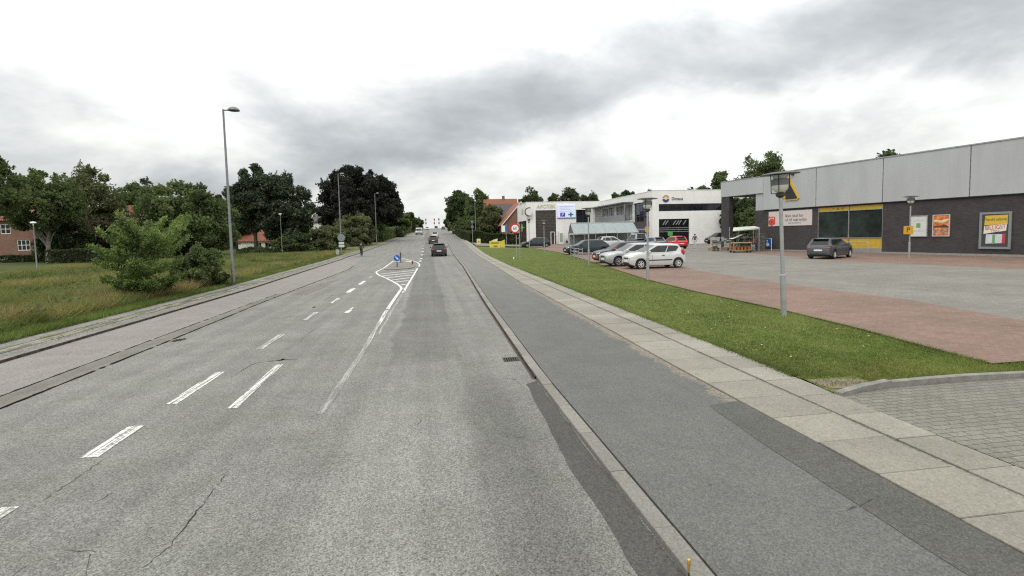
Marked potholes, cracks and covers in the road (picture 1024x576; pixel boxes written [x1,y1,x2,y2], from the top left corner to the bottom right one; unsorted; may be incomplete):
crack [142,475,226,568]
